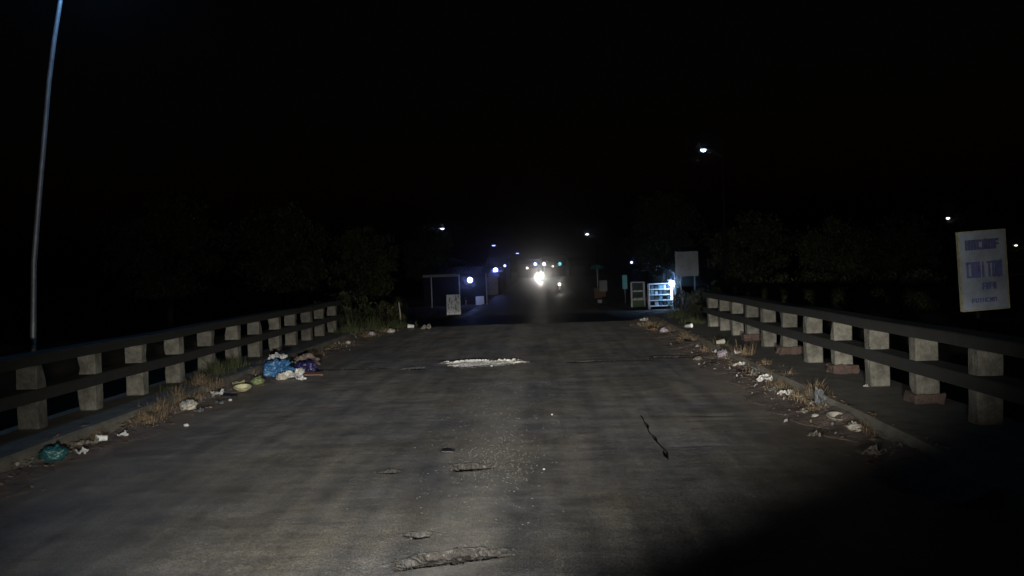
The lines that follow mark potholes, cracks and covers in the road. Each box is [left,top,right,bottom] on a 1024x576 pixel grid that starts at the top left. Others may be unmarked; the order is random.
crack [641,416,669,460]
pothole [392,548,512,572]
pothole [450,462,495,472]
